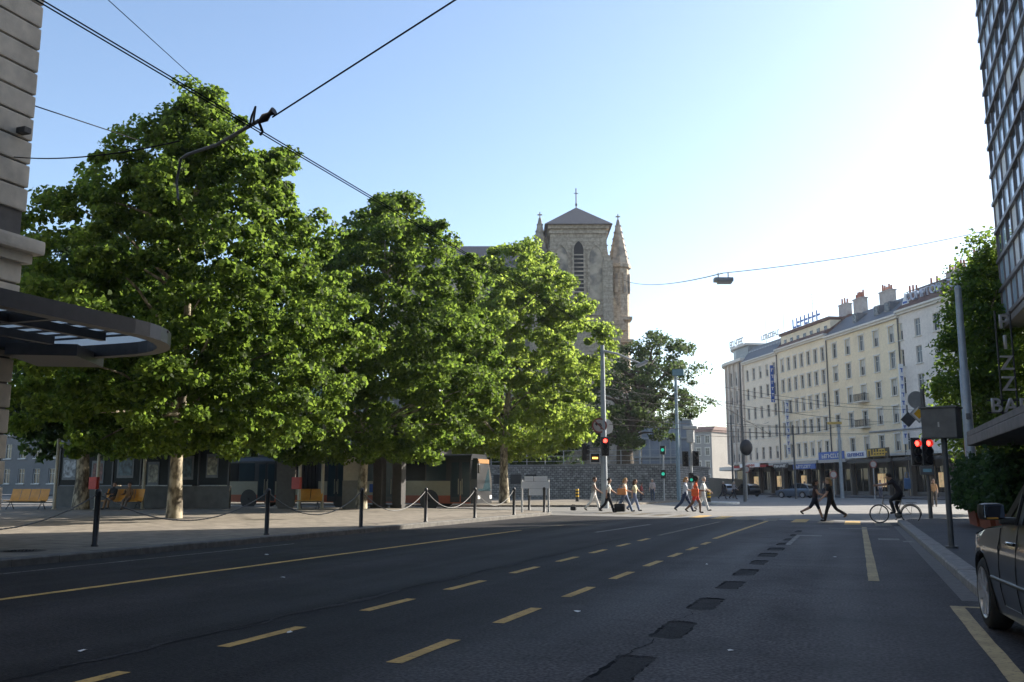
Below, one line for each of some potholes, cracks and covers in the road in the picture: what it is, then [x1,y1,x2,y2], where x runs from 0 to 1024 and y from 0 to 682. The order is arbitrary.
pothole [686,597,725,611]
pothole [648,620,697,639]
pothole [715,581,746,589]
pothole [580,654,657,682]
